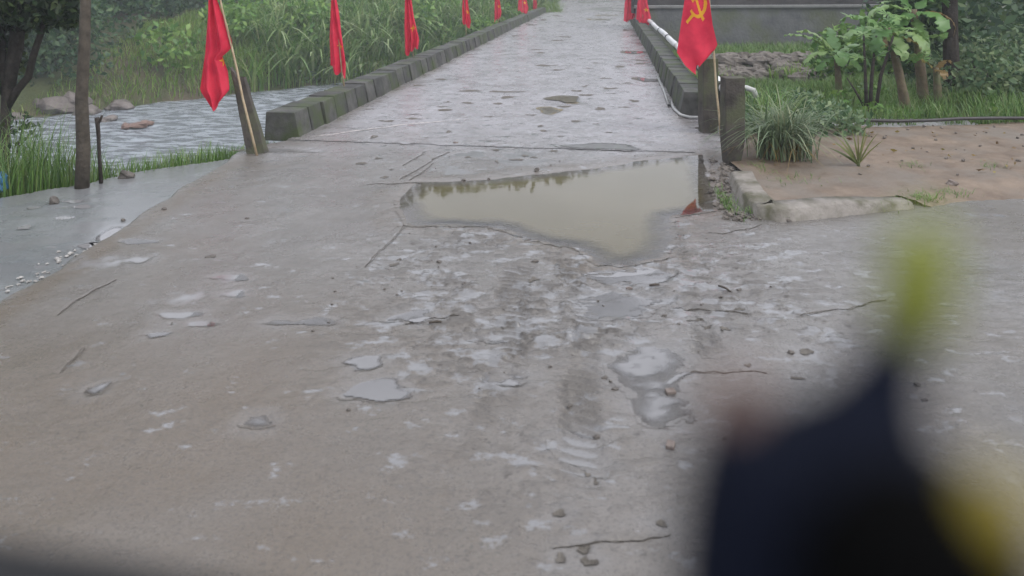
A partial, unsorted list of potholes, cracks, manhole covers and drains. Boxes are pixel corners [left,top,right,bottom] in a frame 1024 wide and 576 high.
crack [801,300,879,315]
crack [367,151,449,185]
crack [553,534,671,549]
pothole [393,154,720,267]
crack [58,280,115,315]
pothole [237,412,276,429]
pothole [603,335,688,428]
